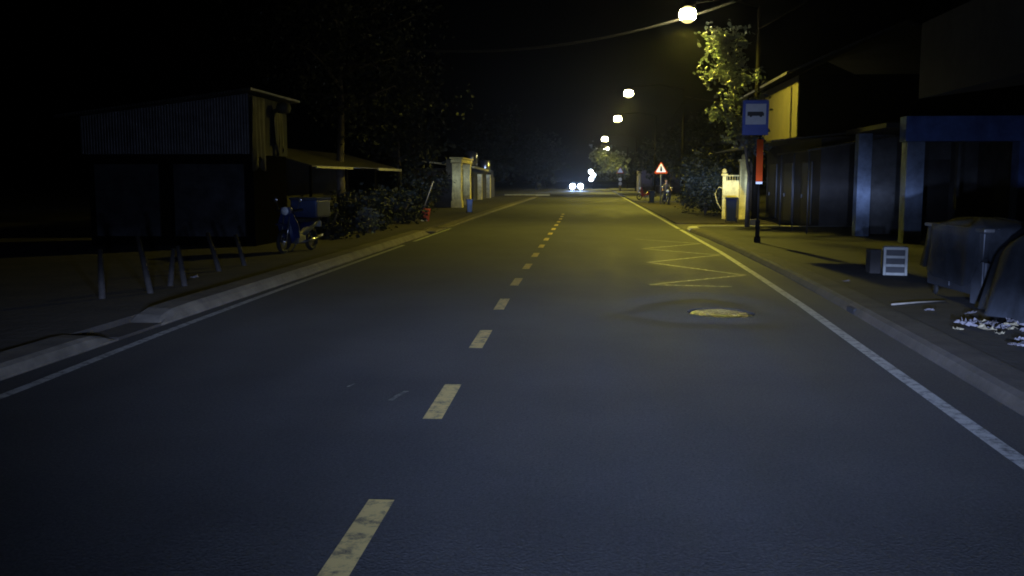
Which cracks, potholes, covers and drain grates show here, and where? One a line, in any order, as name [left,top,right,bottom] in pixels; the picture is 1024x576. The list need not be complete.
manhole cover [689,309,754,318]
